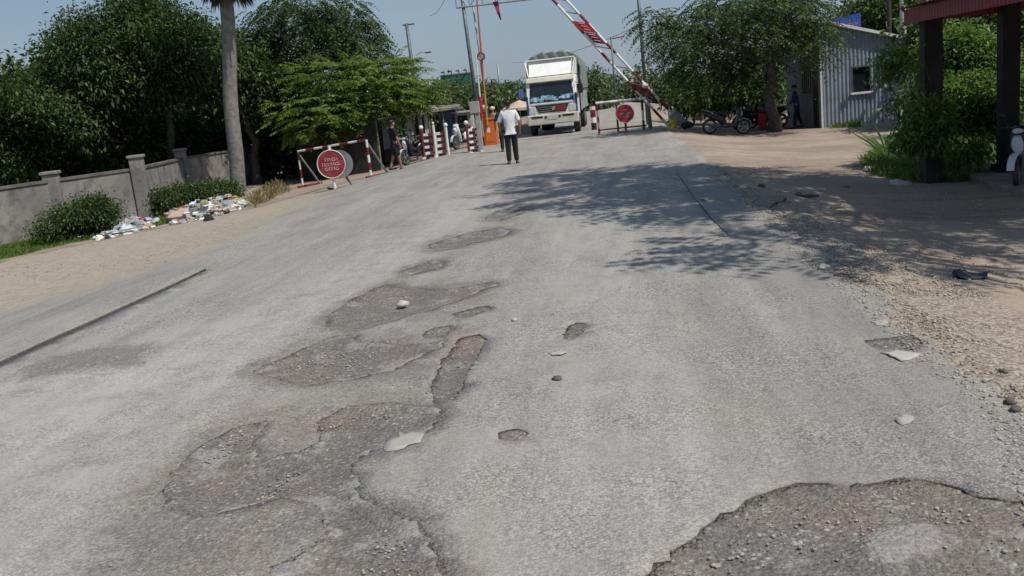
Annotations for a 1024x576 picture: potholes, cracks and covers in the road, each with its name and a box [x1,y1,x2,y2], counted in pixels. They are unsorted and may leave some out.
pothole [428,227,510,250]
pothole [562,323,586,339]
pothole [645,477,1024,576]
pothole [162,402,442,576]
pothole [253,334,446,385]
pothole [498,429,528,441]
pothole [325,281,497,331]
pothole [399,260,443,275]
pothole [430,334,488,404]
